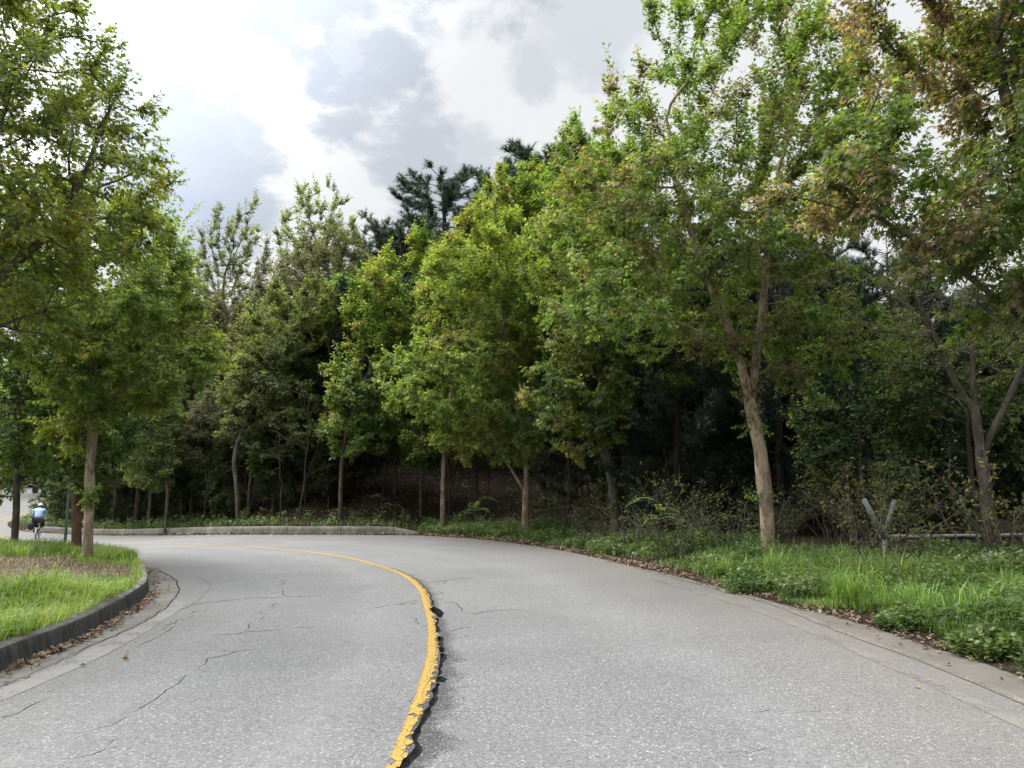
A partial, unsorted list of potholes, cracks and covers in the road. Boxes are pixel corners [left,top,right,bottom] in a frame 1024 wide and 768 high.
crack [368,578,524,768]
crack [68,577,321,759]
